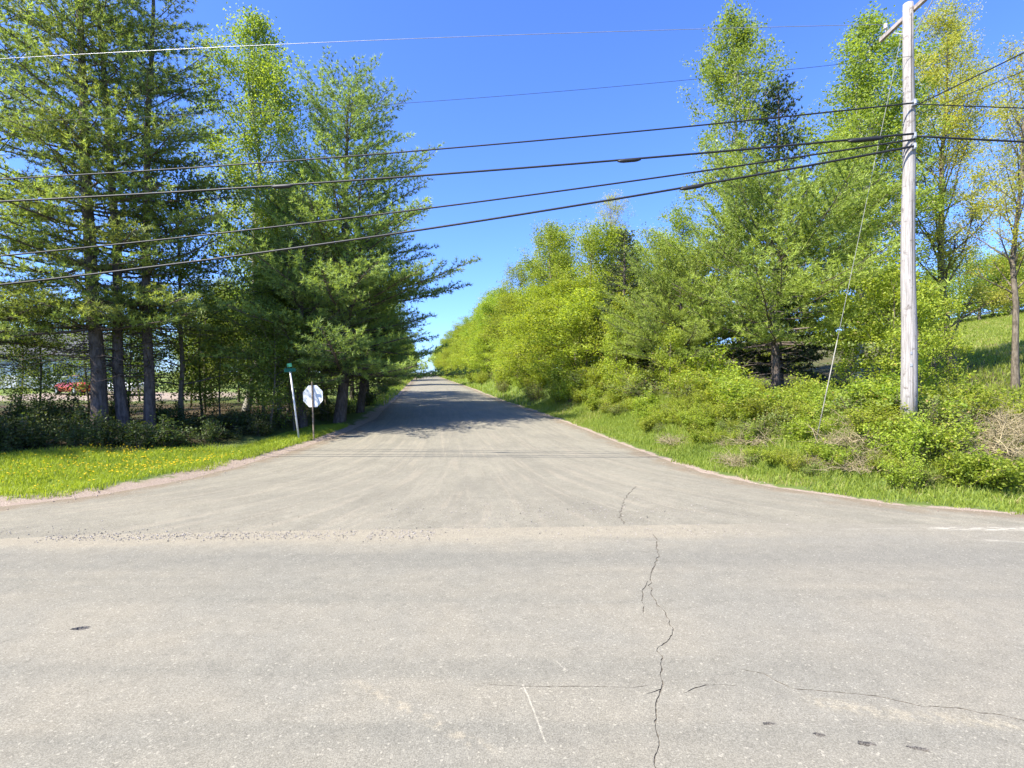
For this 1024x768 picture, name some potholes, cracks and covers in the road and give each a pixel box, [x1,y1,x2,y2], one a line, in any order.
crack [685,669,1024,721]
crack [483,535,674,768]
